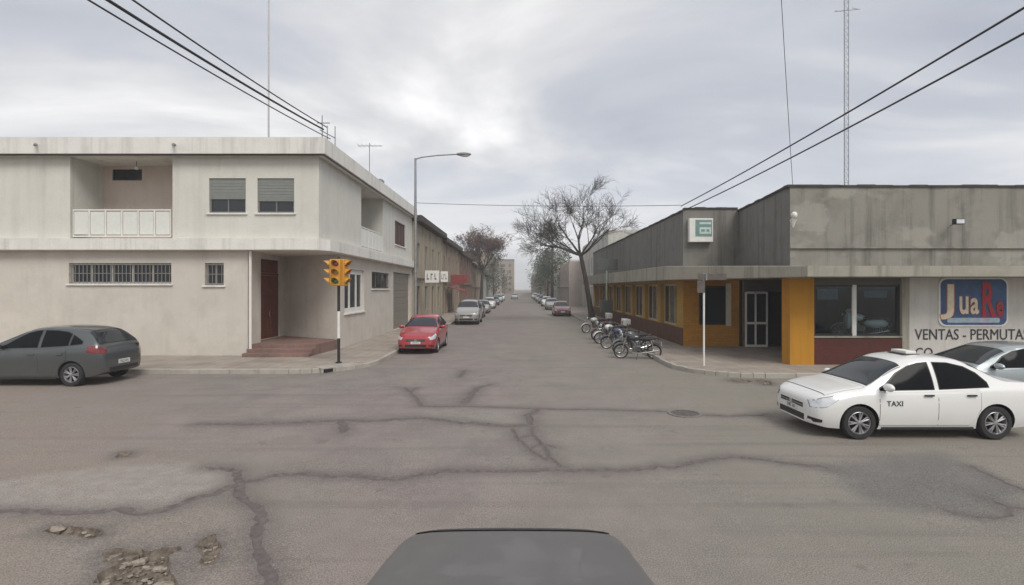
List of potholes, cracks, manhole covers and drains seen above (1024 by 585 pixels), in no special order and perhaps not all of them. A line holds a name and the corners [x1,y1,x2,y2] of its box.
crack [0,370,828,585]
pothole [44,524,107,539]
pothole [93,546,182,585]
manhole cover [668,409,702,418]
pothole [195,533,222,566]
drain grate [315,362,359,373]
